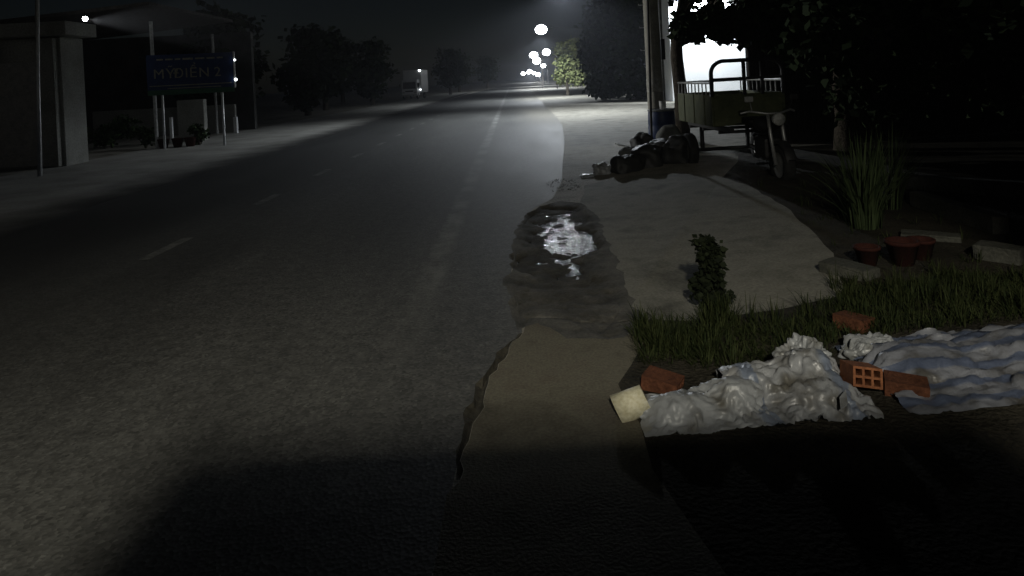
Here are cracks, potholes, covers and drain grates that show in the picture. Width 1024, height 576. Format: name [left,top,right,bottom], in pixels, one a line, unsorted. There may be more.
crack [456,333,522,480]
pothole [502,201,639,339]
